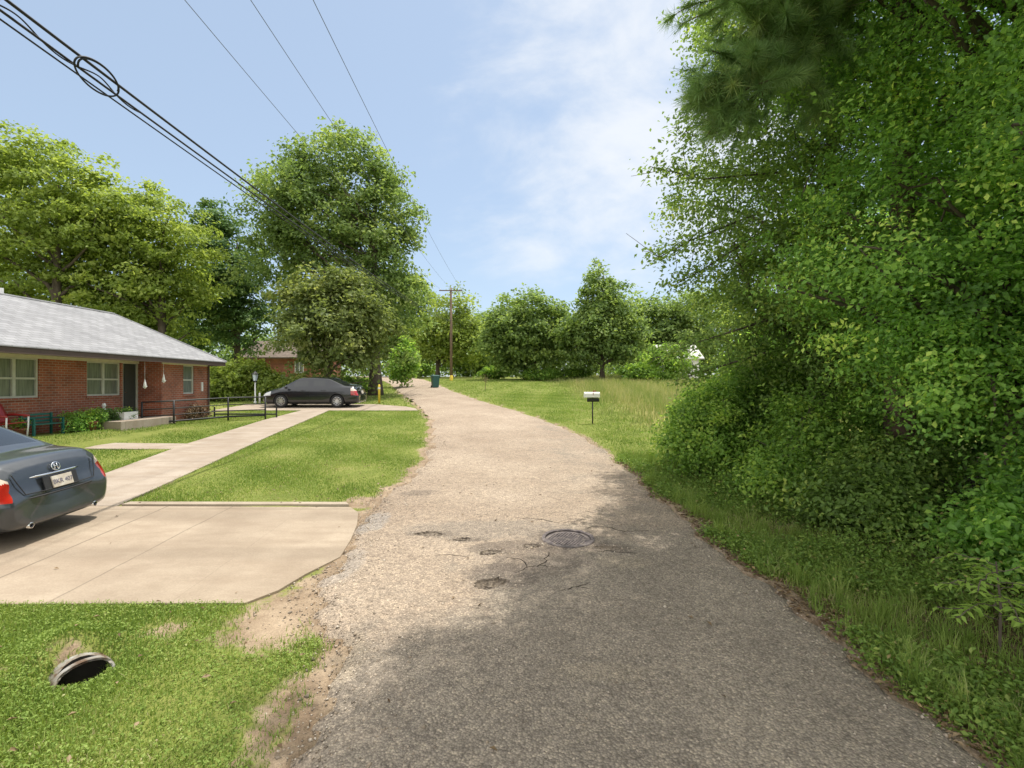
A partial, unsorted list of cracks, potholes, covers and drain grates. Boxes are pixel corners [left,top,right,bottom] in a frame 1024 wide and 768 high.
manhole cover [542,529,595,548]
pothole [474,577,510,590]
crack [508,554,556,573]
